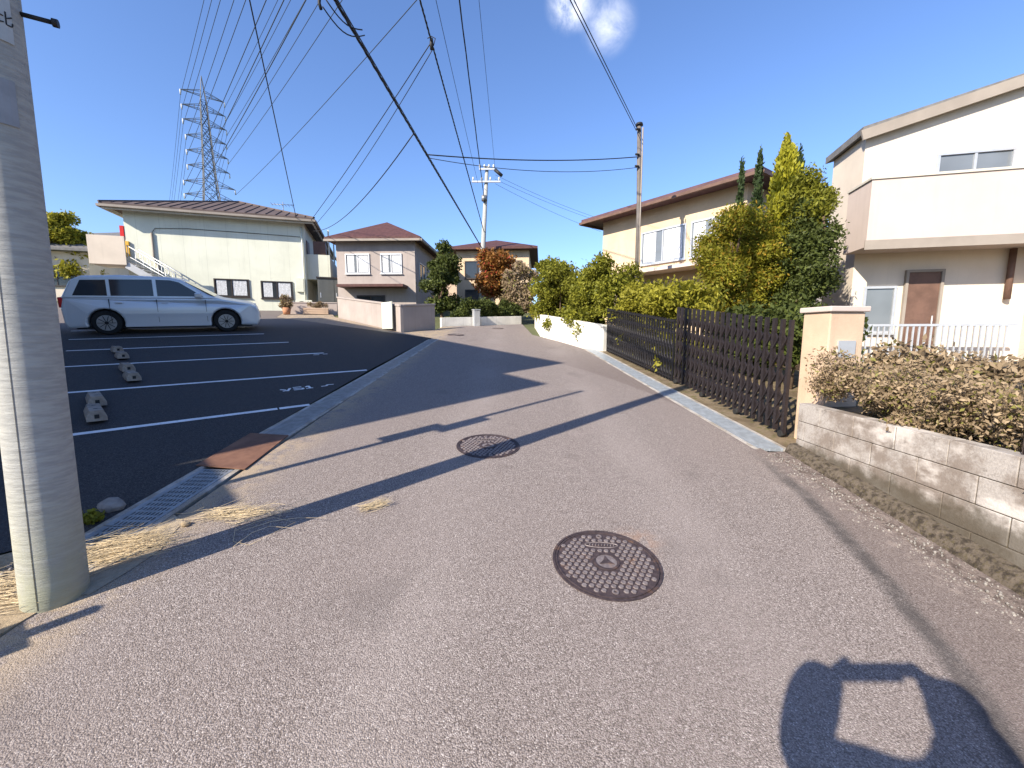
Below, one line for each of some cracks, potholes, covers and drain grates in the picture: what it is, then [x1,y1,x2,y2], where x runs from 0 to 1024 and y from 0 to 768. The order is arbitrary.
drain grate [105,469,233,527]
manhole cover [456,434,520,459]
manhole cover [553,530,663,602]
